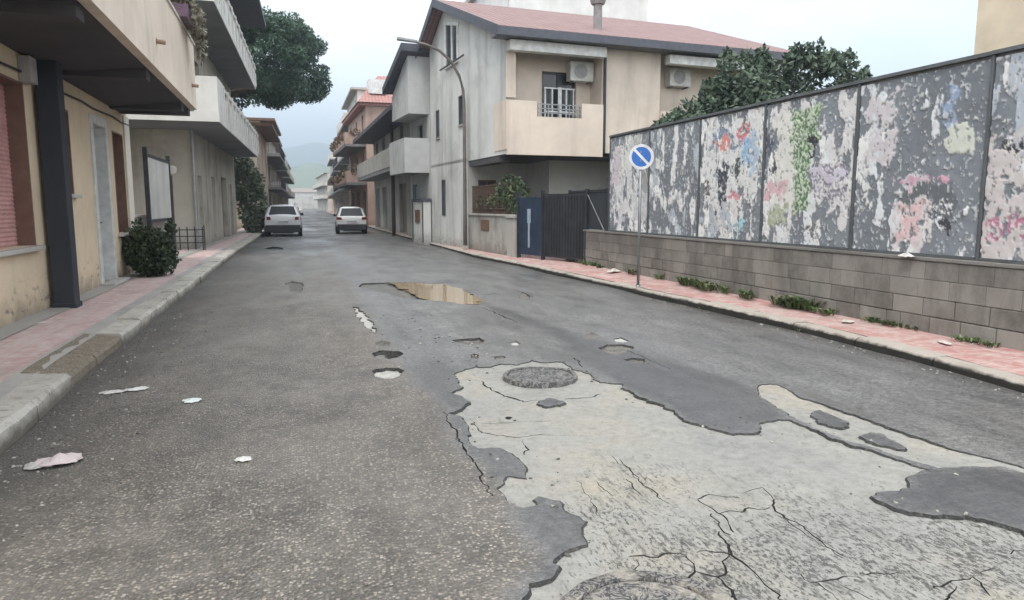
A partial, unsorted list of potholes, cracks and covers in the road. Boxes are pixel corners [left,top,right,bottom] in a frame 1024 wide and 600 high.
pothole [359,282,482,302]
pothole [284,281,304,292]
pothole [452,337,485,345]
pothole [372,368,405,379]
pothole [599,344,634,355]
manhole cover [561,571,734,600]
crack [801,572,898,600]
crack [933,550,1022,600]
pothole [353,307,377,332]
manhole cover [503,366,578,389]
crack [577,456,874,600]
